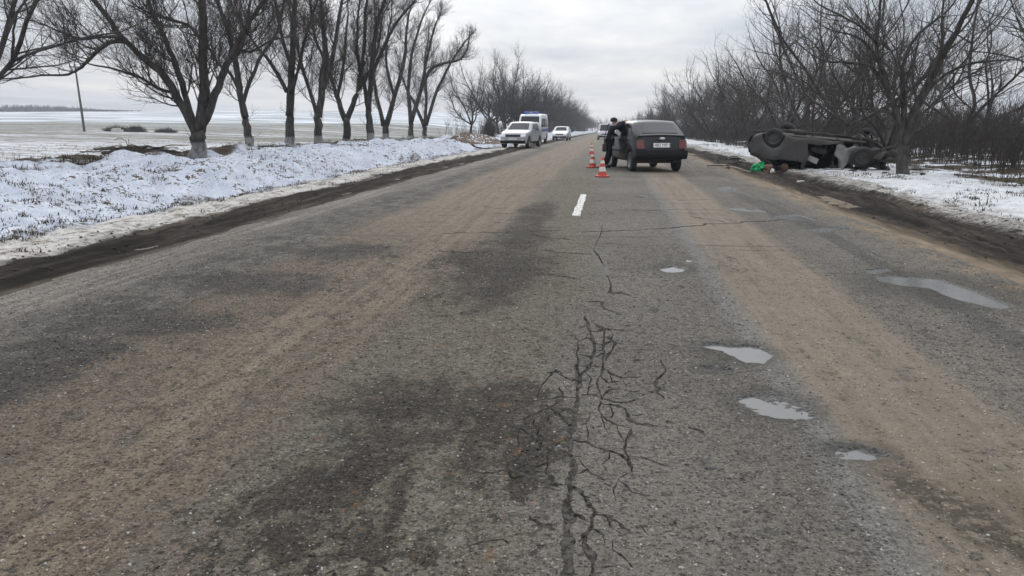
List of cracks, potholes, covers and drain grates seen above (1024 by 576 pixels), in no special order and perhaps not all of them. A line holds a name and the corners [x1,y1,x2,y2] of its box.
pothole [822,441,892,461]
pothole [700,342,776,364]
pothole [733,392,819,420]
pothole [659,264,688,273]
crack [531,199,817,255]
pothole [873,274,1017,309]
crack [463,301,669,576]
